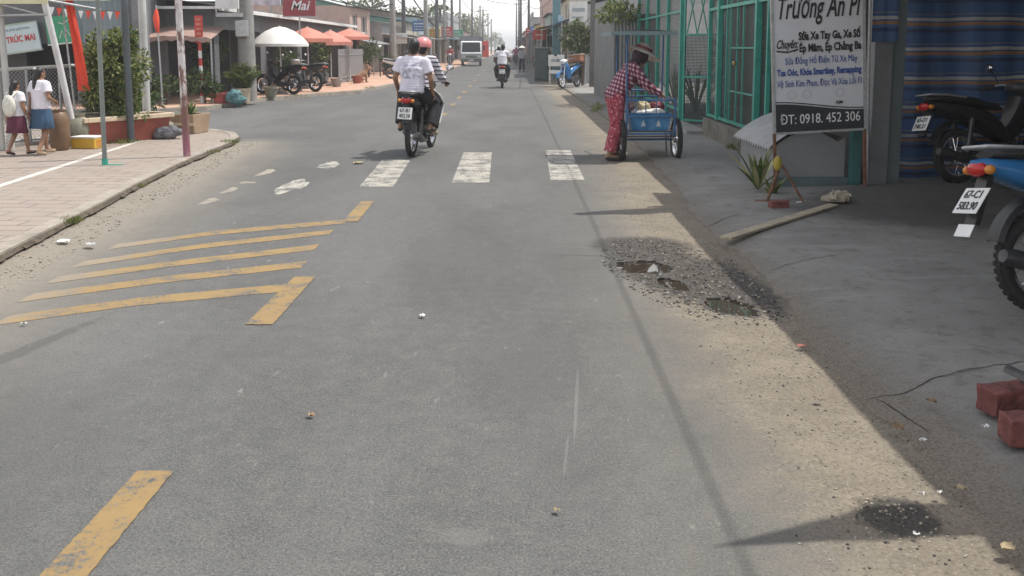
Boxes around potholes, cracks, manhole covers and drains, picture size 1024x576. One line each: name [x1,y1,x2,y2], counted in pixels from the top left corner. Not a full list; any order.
pothole [655,276,693,293]
pothole [612,258,678,276]
pothole [700,295,764,319]
